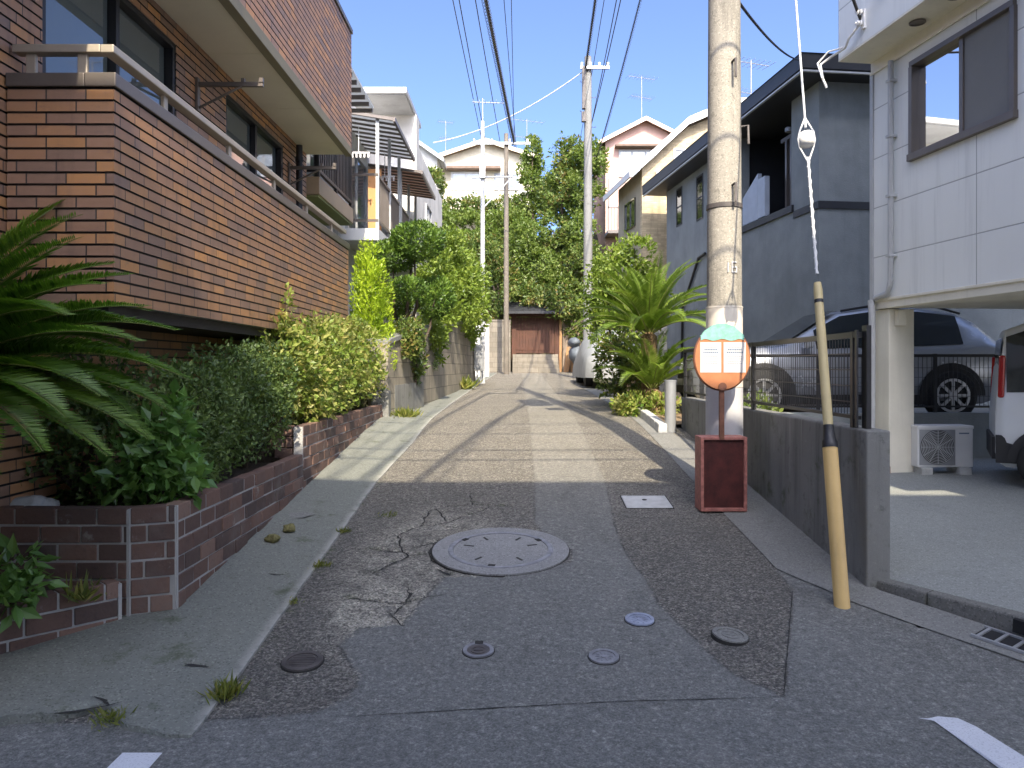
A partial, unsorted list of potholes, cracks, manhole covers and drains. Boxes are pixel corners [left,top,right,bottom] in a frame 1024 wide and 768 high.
utility cover [624,612,655,627]
manhole cover [431,527,570,577]
utility cover [280,650,324,673]
utility cover [588,648,620,665]
crack [356,588,446,626]
crack [50,696,118,714]
drain grate [970,617,1024,654]
utility cover [462,641,495,659]
crack [373,494,501,575]
utility cover [620,496,675,509]
utility cover [711,626,750,646]
